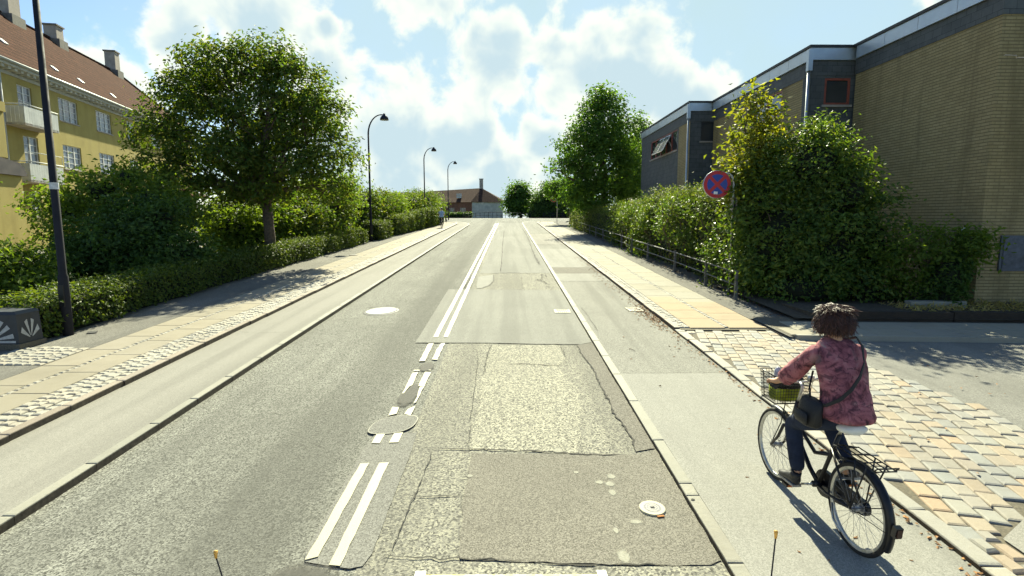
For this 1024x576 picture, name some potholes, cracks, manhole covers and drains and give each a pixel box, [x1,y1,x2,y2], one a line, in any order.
manhole cover [363,307,399,316]
crack [381,346,670,566]
manhole cover [639,500,666,518]
